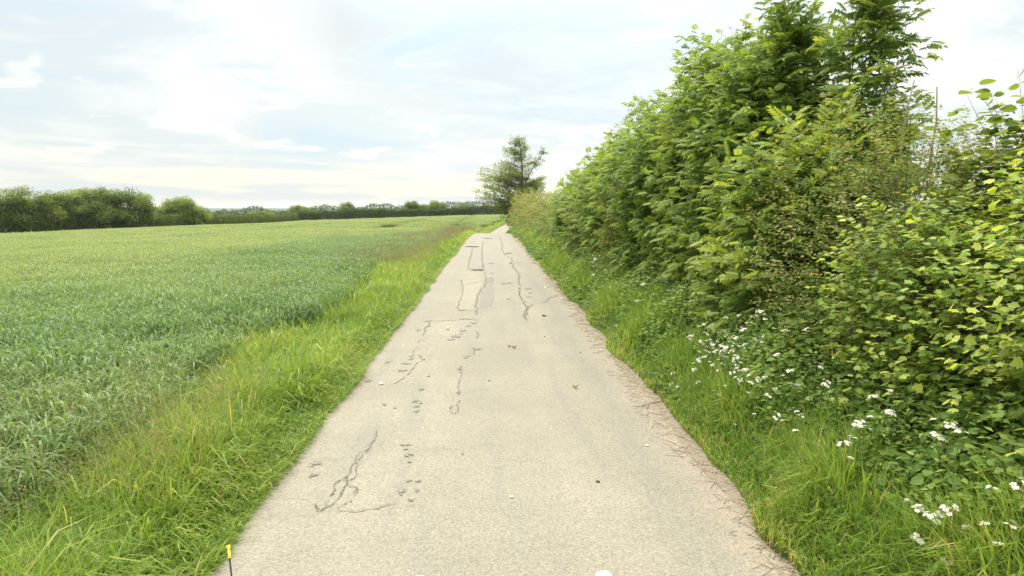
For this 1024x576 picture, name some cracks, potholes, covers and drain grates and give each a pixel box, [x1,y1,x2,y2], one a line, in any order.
crack [449,272,487,414]
crack [315,431,377,511]
crack [499,236,557,320]
